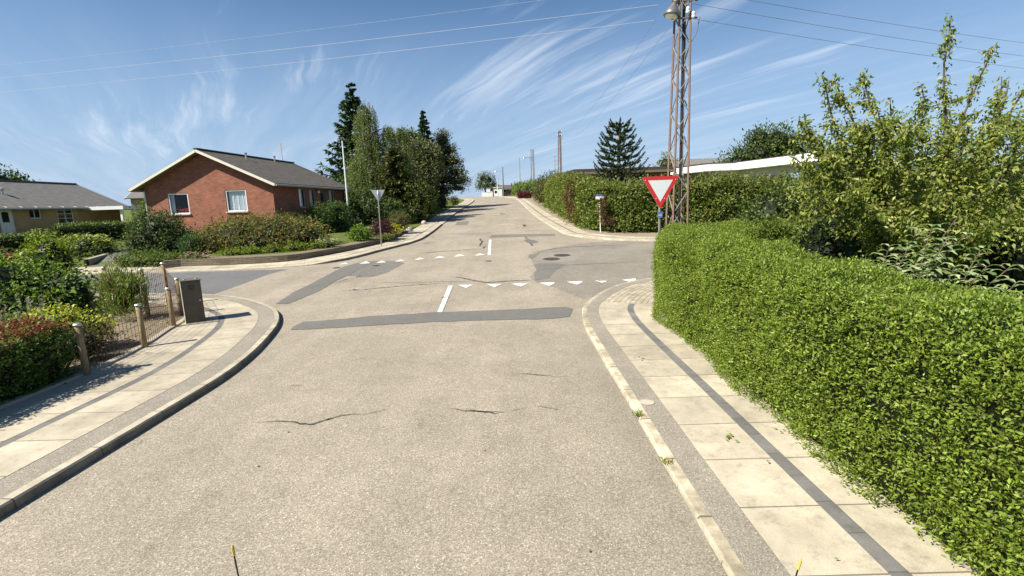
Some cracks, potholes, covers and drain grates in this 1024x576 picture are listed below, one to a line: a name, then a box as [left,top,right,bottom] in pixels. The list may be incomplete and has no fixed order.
crack [209,409,386,425]
